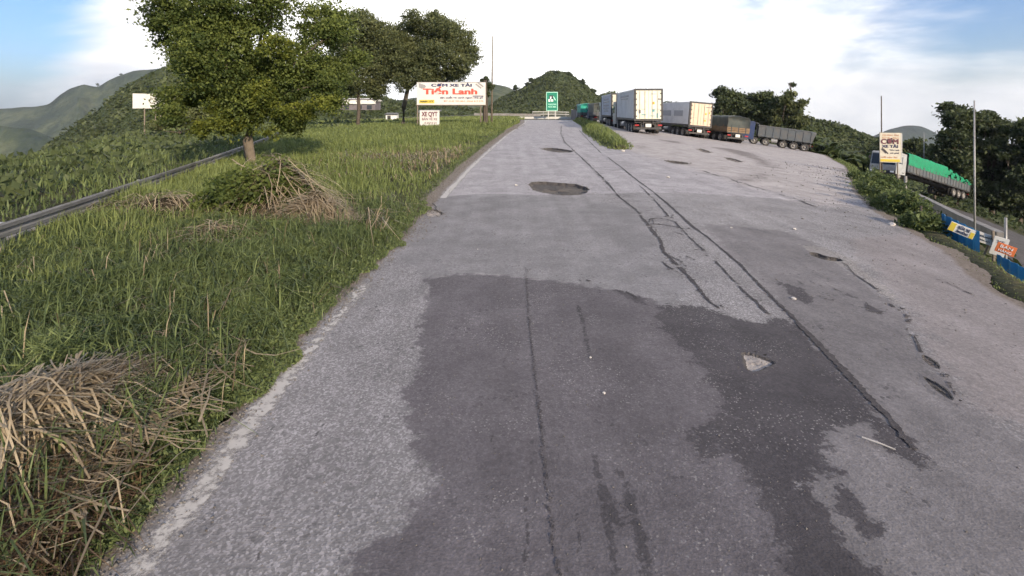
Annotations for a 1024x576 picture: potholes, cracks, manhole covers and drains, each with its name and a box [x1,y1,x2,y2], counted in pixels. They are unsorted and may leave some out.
pothole [737,350,780,374]
pothole [916,352,947,372]
pothole [521,181,599,197]
crack [525,267,562,576]
pothole [802,250,852,264]
pothole [919,373,959,404]
crack [561,126,971,449]
